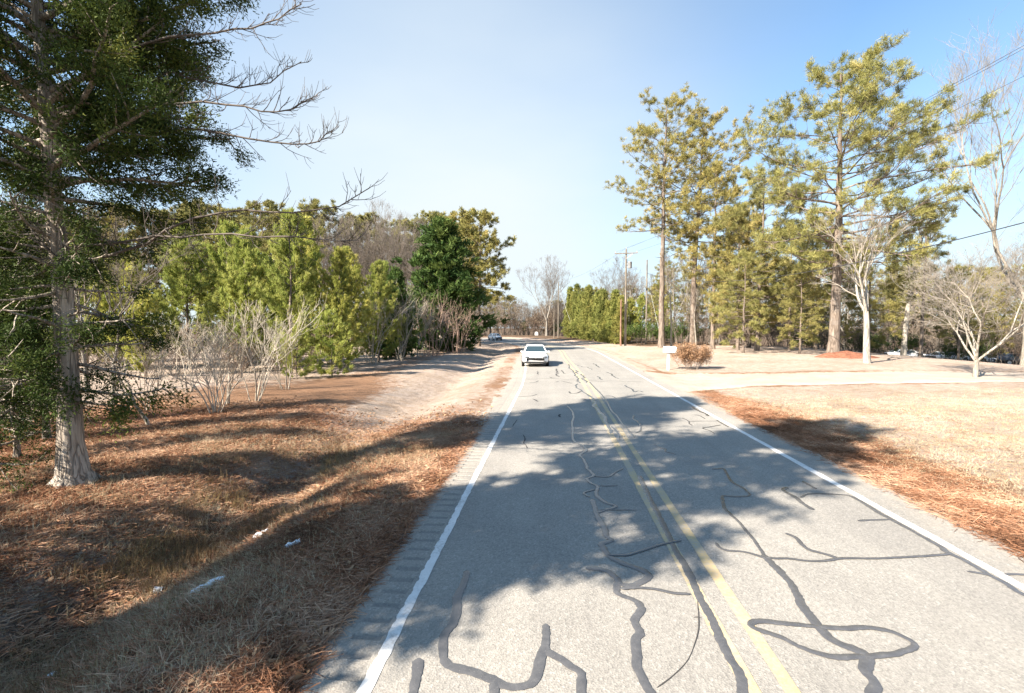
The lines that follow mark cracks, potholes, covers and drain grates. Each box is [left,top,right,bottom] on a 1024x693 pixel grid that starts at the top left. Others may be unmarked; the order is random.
crack [658,600,702,687]
crack [520,369,587,402]
